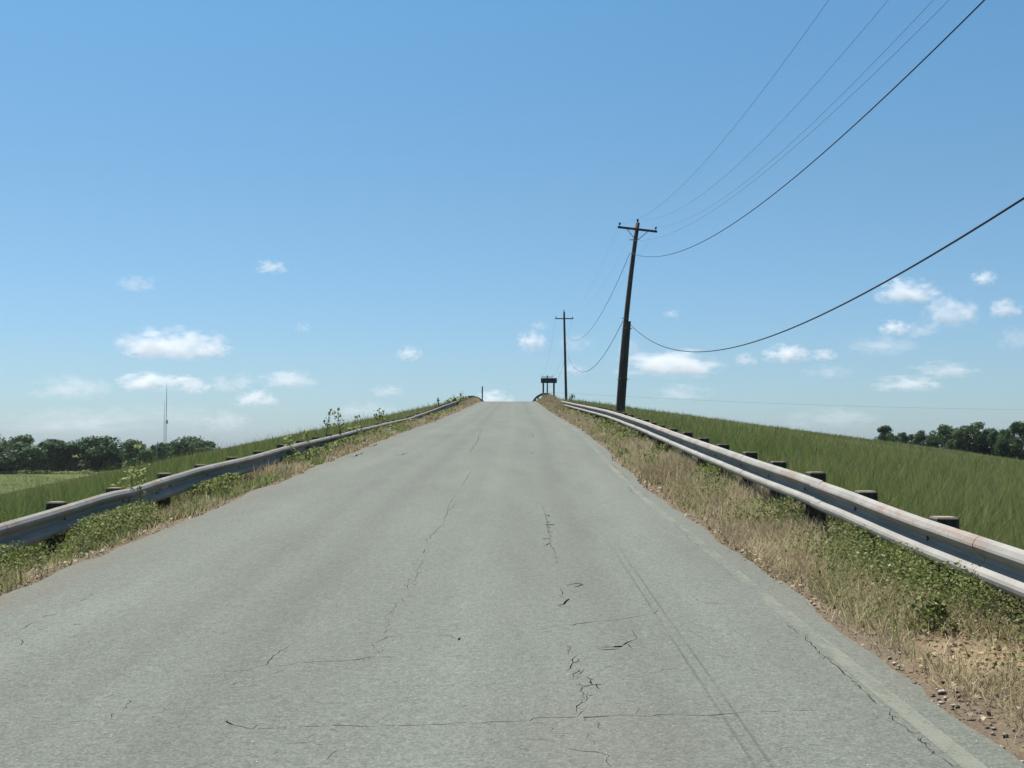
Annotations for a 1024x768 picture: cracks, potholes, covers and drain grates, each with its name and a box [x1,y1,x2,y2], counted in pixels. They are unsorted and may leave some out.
crack [226,646,807,764]
crack [789,626,955,767]
crack [205,437,479,690]
crack [539,583,658,650]
